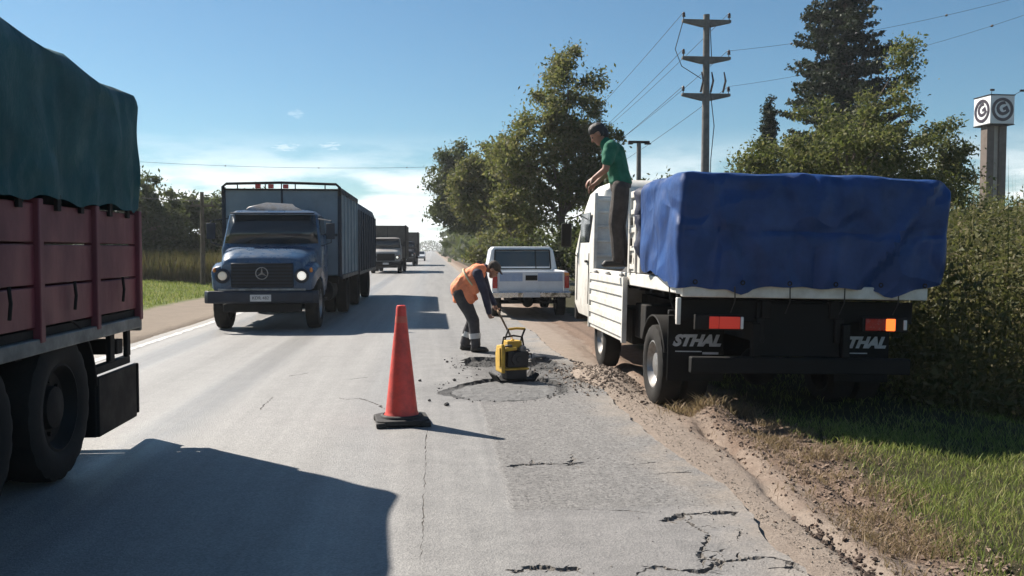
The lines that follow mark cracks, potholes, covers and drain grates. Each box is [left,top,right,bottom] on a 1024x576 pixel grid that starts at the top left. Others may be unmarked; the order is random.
crack [506,454,583,469]
crack [635,510,805,576]
crack [505,563,585,575]
